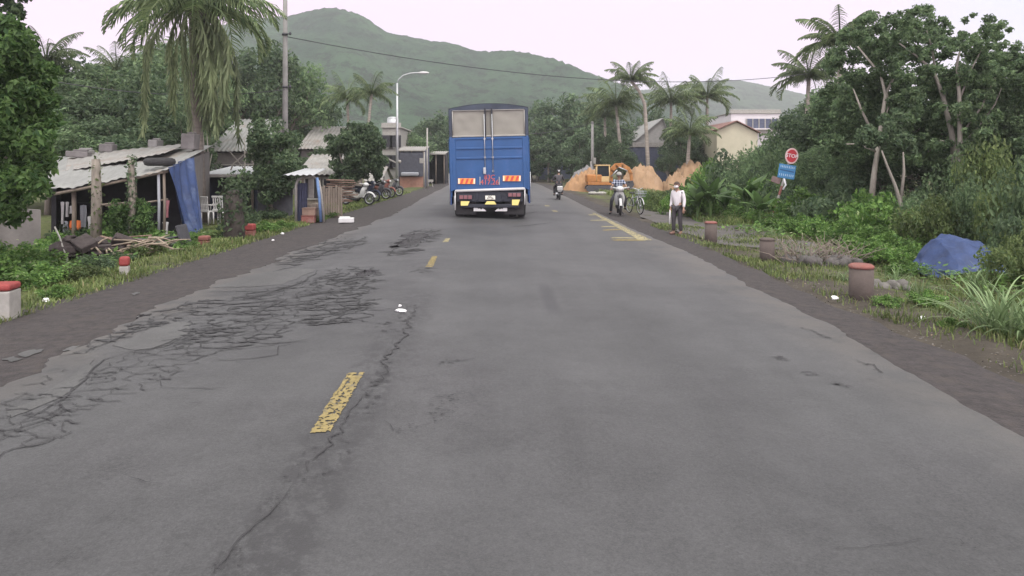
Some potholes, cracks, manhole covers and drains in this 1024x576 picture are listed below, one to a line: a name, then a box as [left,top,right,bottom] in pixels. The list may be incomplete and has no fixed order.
crack [806,537,976,548]
crack [778,356,884,387]
crack [0,228,443,456]
